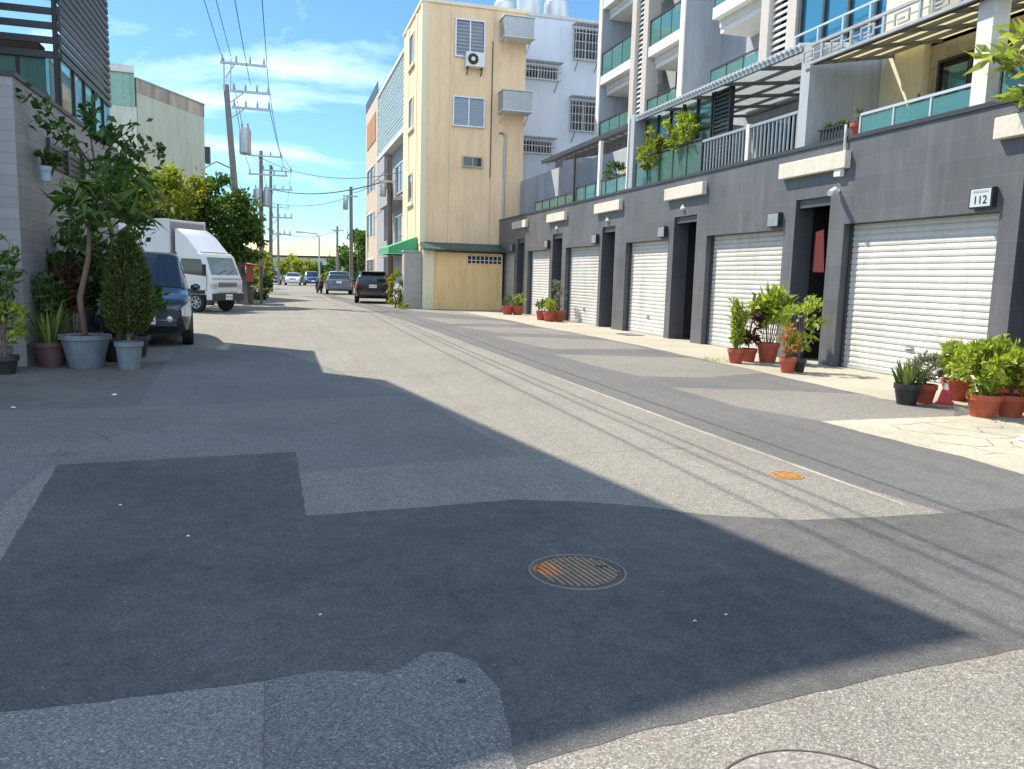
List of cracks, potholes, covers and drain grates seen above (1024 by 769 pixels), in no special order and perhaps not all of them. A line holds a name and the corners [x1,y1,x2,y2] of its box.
manhole cover [770,471,804,480]
manhole cover [528,554,627,590]
manhole cover [725,749,880,769]
